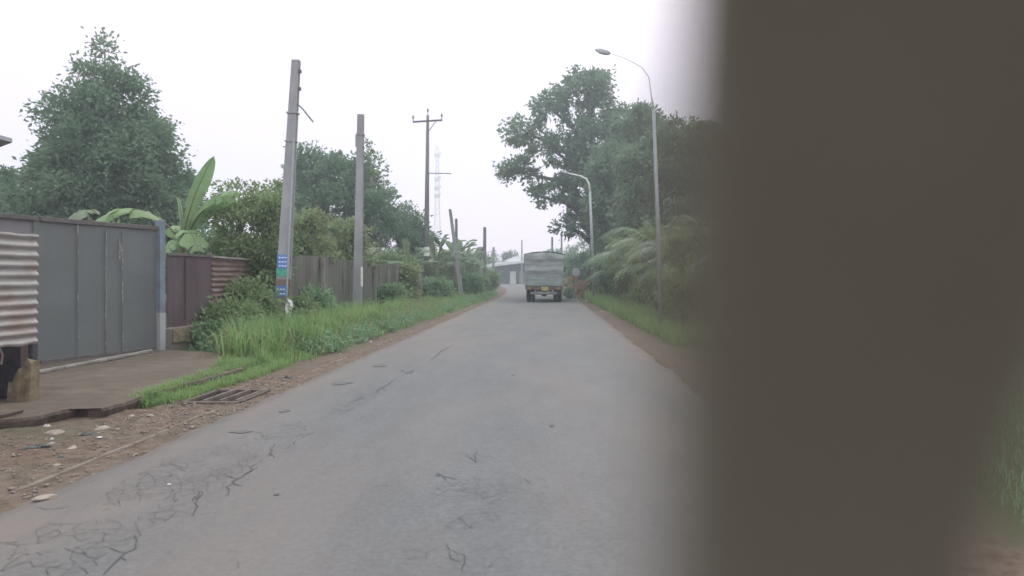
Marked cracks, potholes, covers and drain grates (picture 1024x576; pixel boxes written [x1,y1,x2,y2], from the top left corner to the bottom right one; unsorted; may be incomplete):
crack [405,449,528,573]
crack [1,420,314,575]
crack [338,349,444,414]
